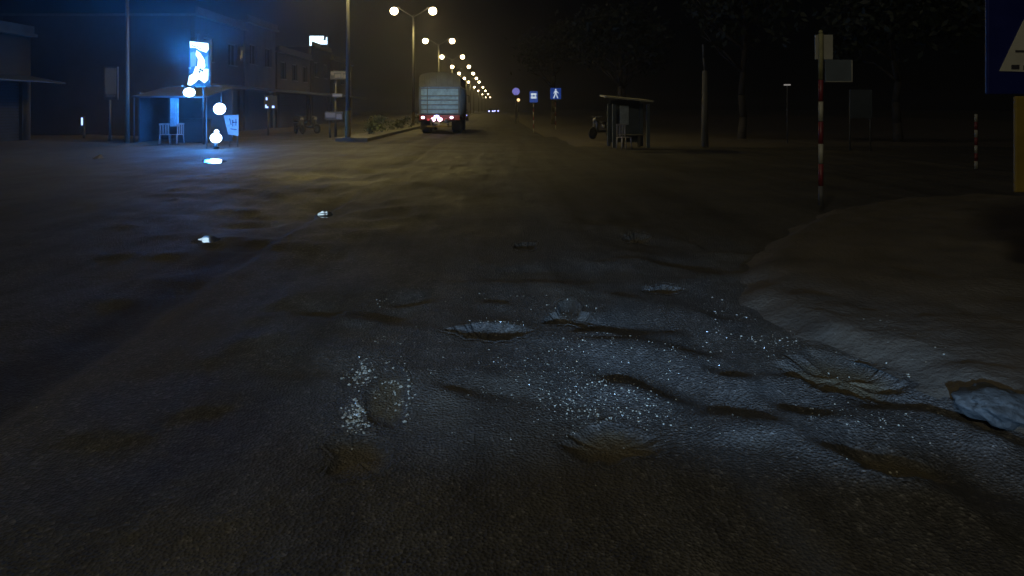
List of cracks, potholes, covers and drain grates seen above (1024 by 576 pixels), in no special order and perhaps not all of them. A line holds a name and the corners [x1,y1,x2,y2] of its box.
pothole [639,283,689,295]
pothole [511,242,539,251]
pothole [319,428,400,486]
pothole [435,321,542,343]
pothole [618,231,654,245]
pothole [359,362,413,433]
pothole [549,419,673,469]
pothole [538,295,601,330]
pothole [763,344,920,408]
